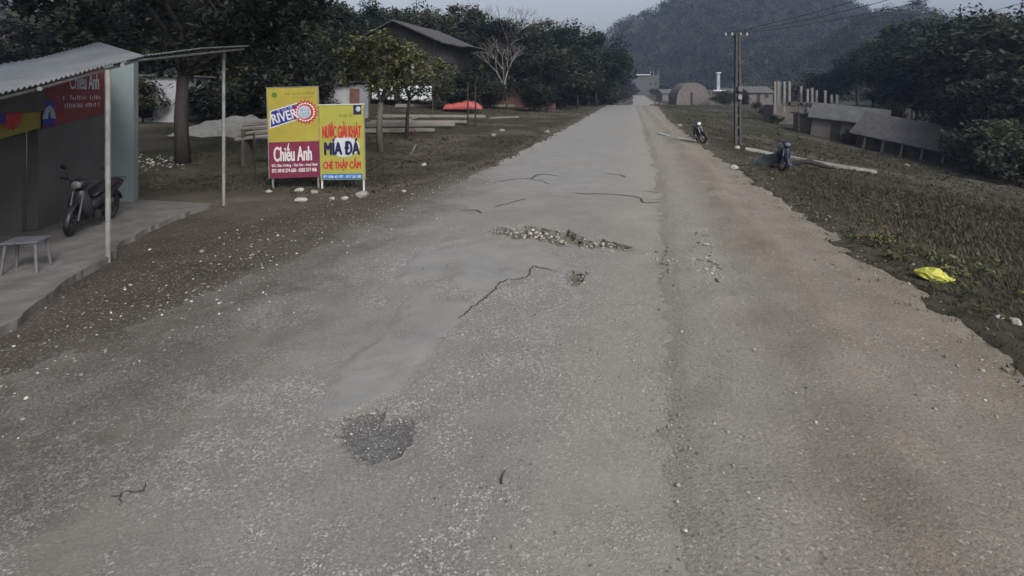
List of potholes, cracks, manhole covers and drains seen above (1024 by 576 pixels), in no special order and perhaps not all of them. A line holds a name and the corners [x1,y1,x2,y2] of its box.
pothole [565,270,586,286]
pothole [488,225,634,251]
crack [111,481,147,506]
crack [580,191,658,203]
crack [459,266,553,318]
